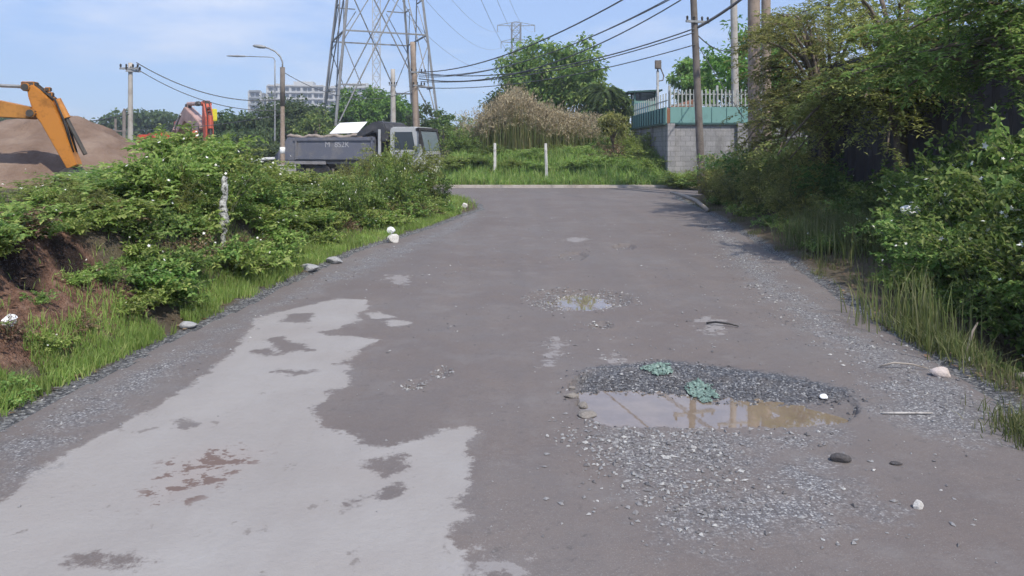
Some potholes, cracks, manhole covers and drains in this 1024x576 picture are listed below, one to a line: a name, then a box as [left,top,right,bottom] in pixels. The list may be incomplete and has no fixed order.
pothole [429,364,455,379]
pothole [523,288,634,312]
pothole [567,365,862,429]
pothole [400,379,428,391]
